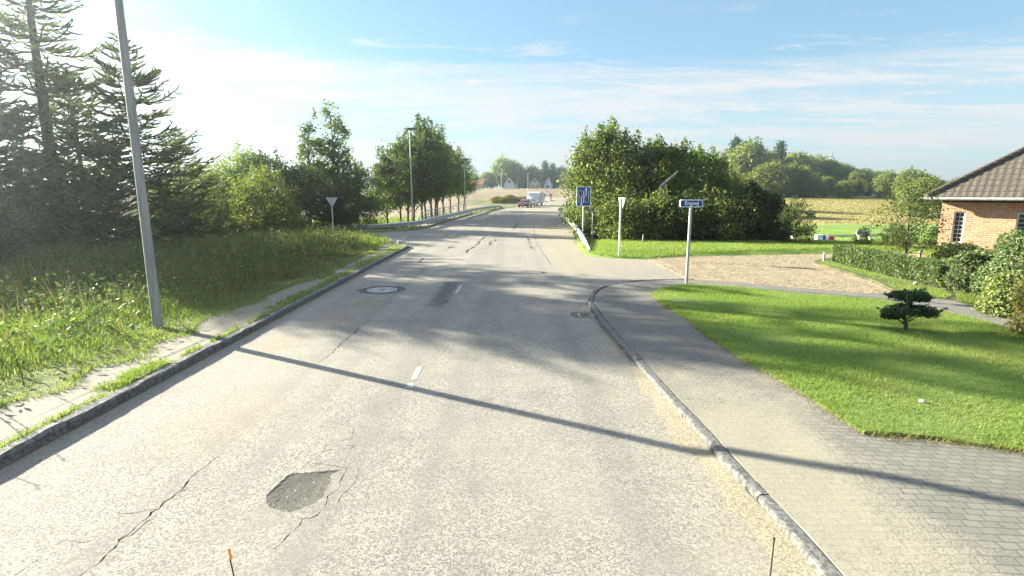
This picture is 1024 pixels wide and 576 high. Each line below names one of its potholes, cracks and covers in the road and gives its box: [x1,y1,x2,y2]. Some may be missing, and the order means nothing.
crack [55,454,223,576]
pothole [266,470,340,512]
manhole cover [358,286,406,294]
crack [272,430,359,549]
